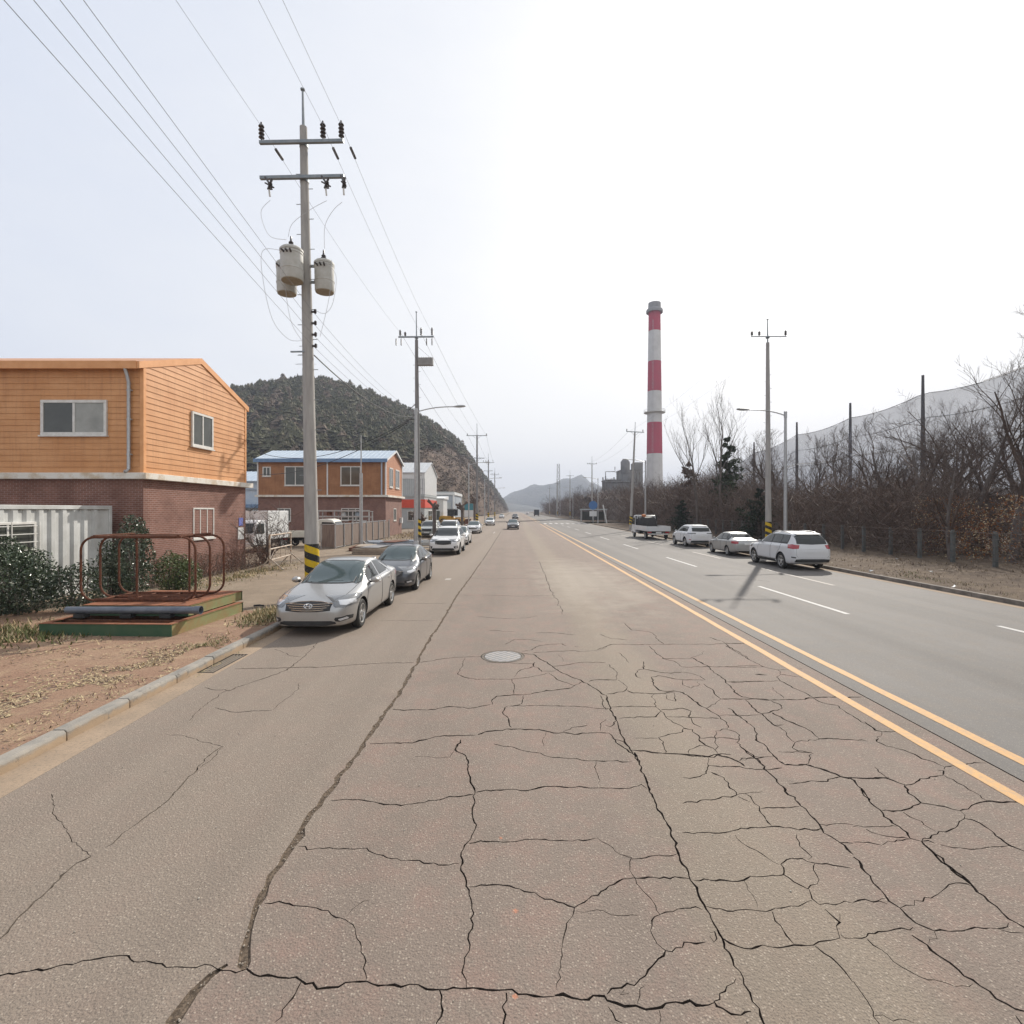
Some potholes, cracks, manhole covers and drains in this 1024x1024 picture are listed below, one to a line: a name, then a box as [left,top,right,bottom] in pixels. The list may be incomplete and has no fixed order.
crack [0,532,1024,1024]
drain grate [197,654,248,673]
manhole cover [481,650,524,663]
